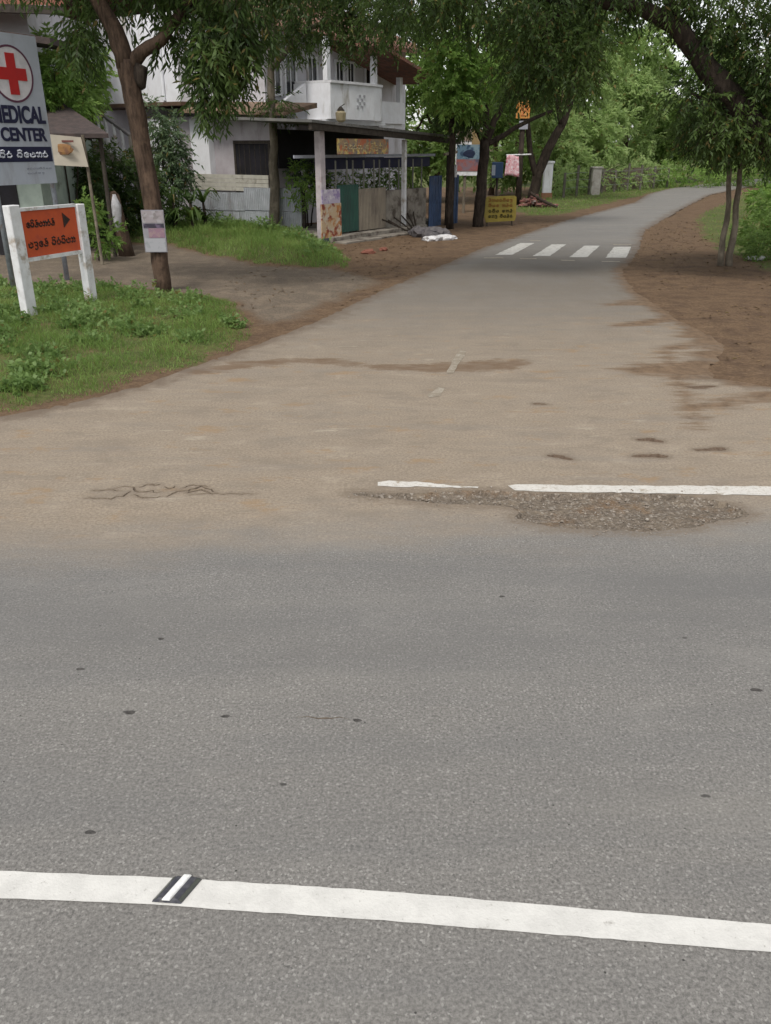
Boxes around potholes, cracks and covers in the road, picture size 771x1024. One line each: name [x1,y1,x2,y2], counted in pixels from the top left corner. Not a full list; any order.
pothole [348,485,755,537]
